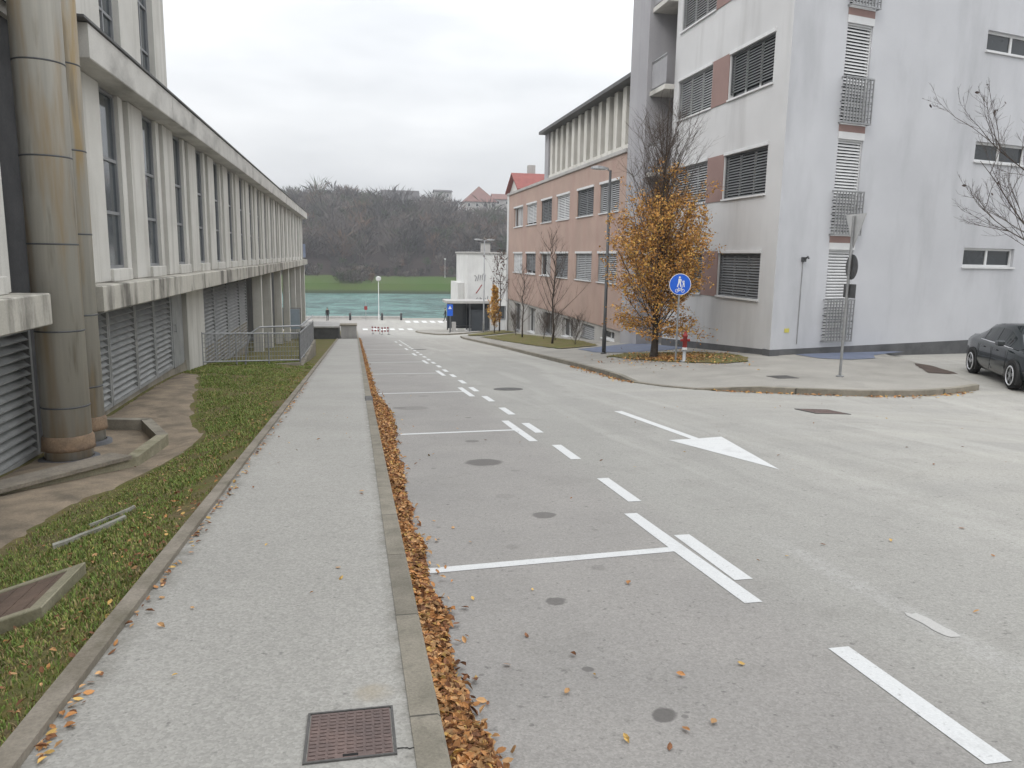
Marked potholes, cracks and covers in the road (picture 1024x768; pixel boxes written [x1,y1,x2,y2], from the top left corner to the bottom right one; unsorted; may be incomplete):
manhole cover [302,705,397,765]
